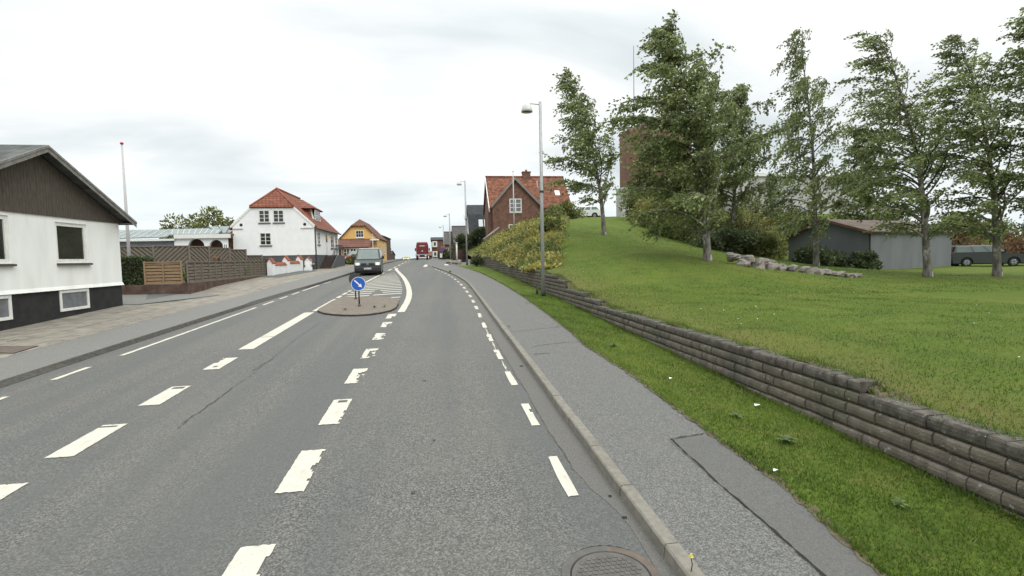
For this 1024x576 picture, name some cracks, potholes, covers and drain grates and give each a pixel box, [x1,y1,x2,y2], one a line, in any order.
manhole cover [561,546,660,576]
crack [178,323,318,428]
